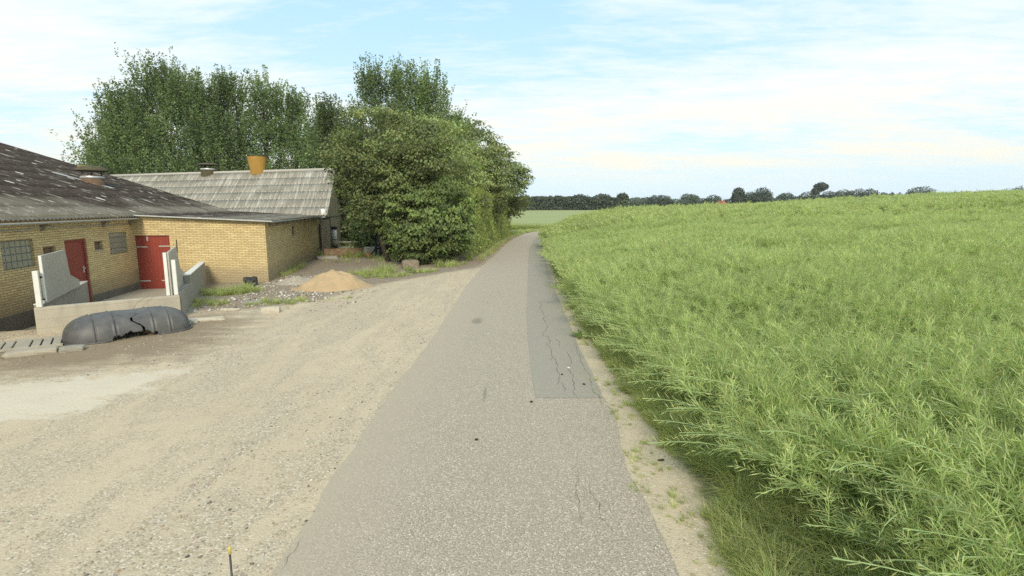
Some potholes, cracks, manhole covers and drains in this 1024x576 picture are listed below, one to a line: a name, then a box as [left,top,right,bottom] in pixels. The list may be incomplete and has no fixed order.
crack [539,307,602,403]
